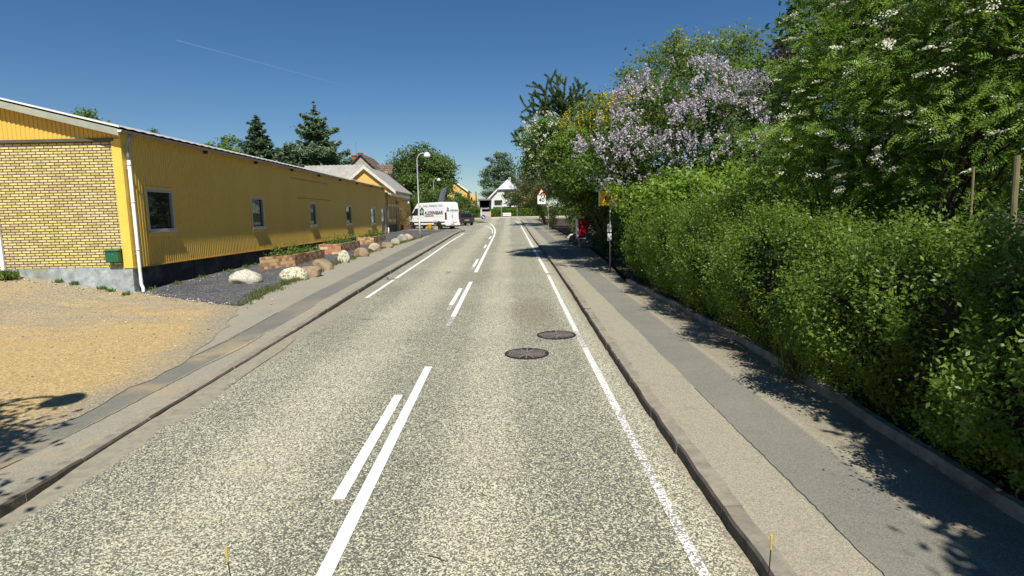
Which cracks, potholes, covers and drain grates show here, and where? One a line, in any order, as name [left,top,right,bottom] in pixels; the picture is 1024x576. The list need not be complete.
manhole cover [537,330,576,340]
manhole cover [505,348,549,360]
